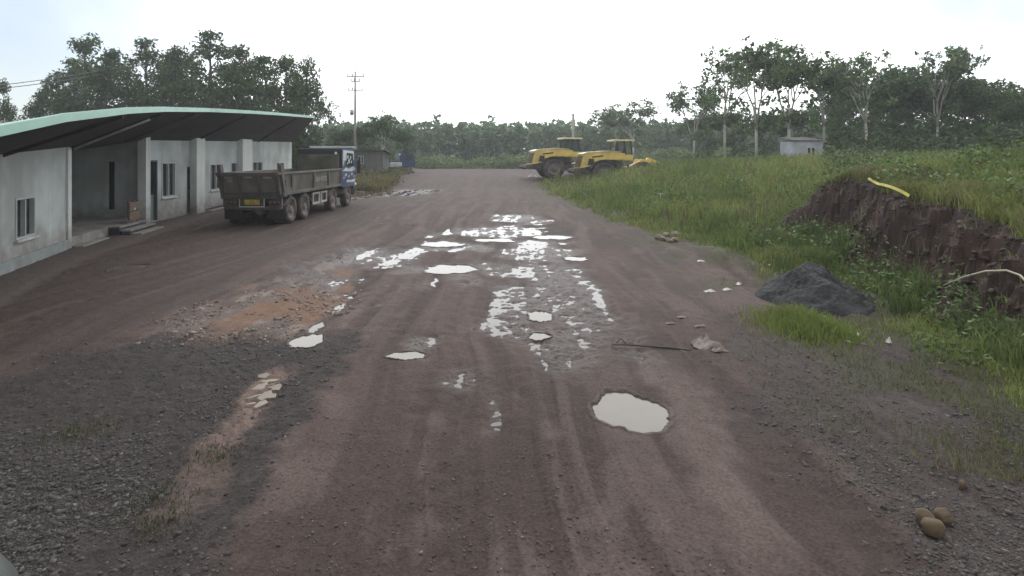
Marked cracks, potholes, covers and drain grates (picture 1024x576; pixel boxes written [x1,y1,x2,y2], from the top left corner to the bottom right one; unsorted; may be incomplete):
pothole [420,263,483,275]
pothole [526,310,555,323]
pothole [382,350,431,361]
pothole [585,386,677,436]
pothole [527,332,554,343]
pothole [285,333,327,349]
